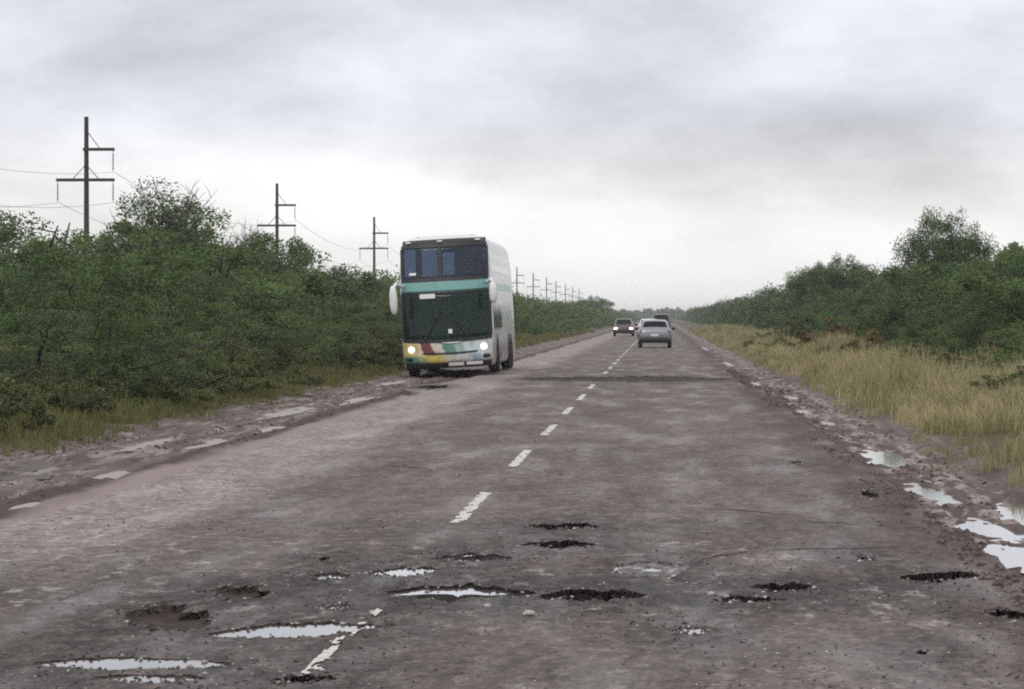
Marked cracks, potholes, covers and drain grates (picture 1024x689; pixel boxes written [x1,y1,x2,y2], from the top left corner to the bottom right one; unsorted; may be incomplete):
pothole [888,569,992,584]
pothole [535,587,649,602]
pothole [516,538,599,550]
pothole [712,594,787,605]
pothole [436,550,516,562]
pothole [115,600,216,635]
pothole [203,582,274,602]
pothole [21,655,234,673]
pothole [381,579,540,605]
pothole [748,580,820,593]
pothole [359,564,443,577]
pothole [198,619,394,640]
